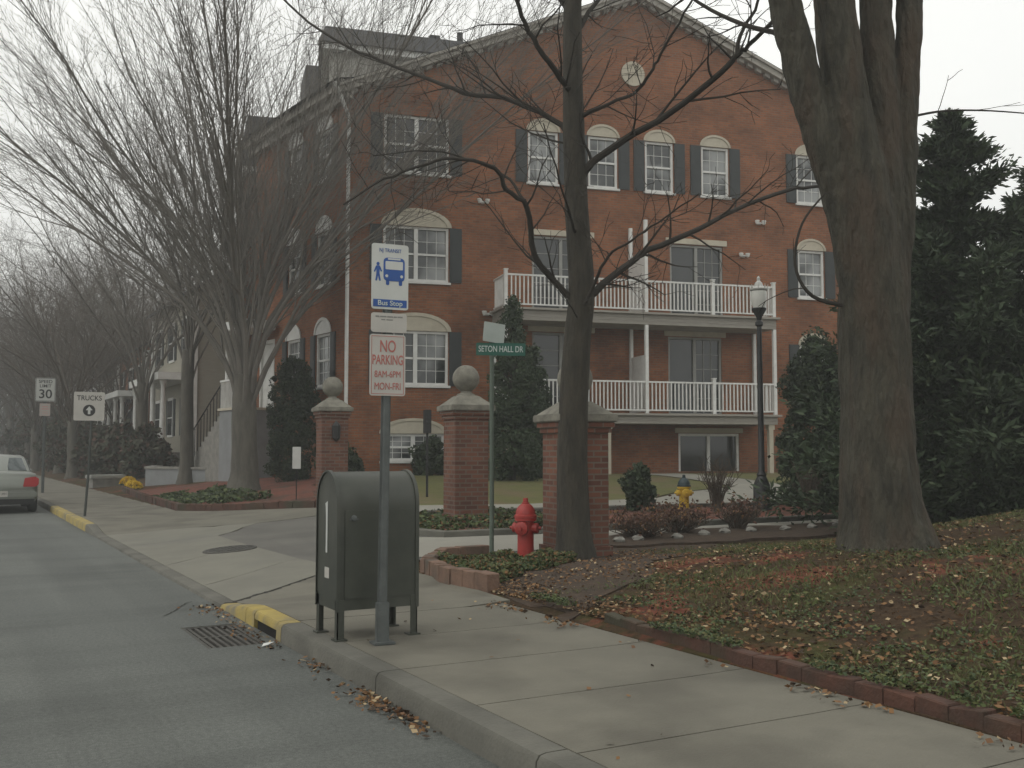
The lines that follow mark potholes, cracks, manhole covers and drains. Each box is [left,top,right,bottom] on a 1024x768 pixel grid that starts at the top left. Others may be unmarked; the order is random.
drain grate [181,621,276,649]
manhole cover [202,545,257,554]
